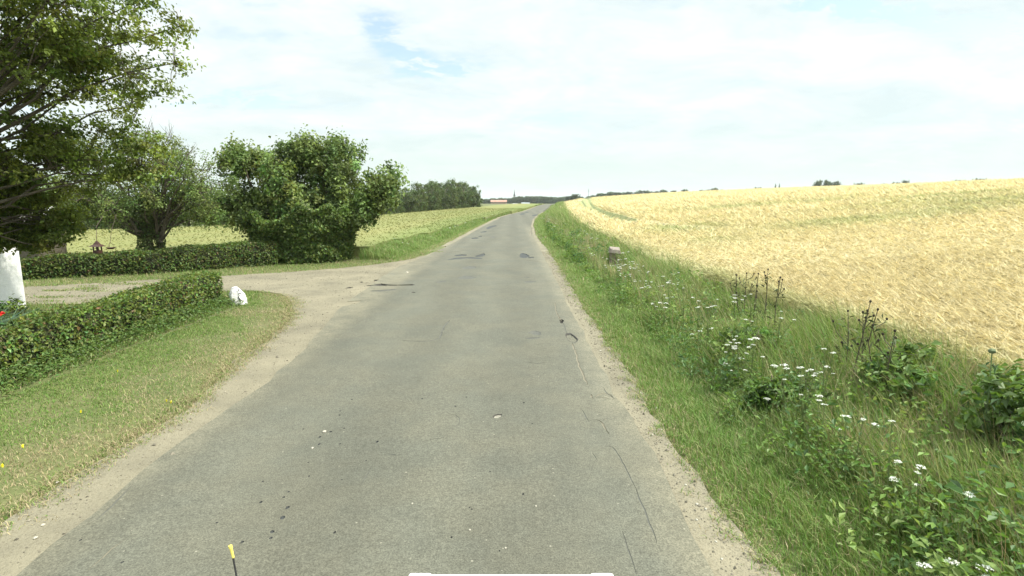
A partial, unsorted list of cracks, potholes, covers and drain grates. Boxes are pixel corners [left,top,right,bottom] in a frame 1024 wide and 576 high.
crack [555,304,657,572]
